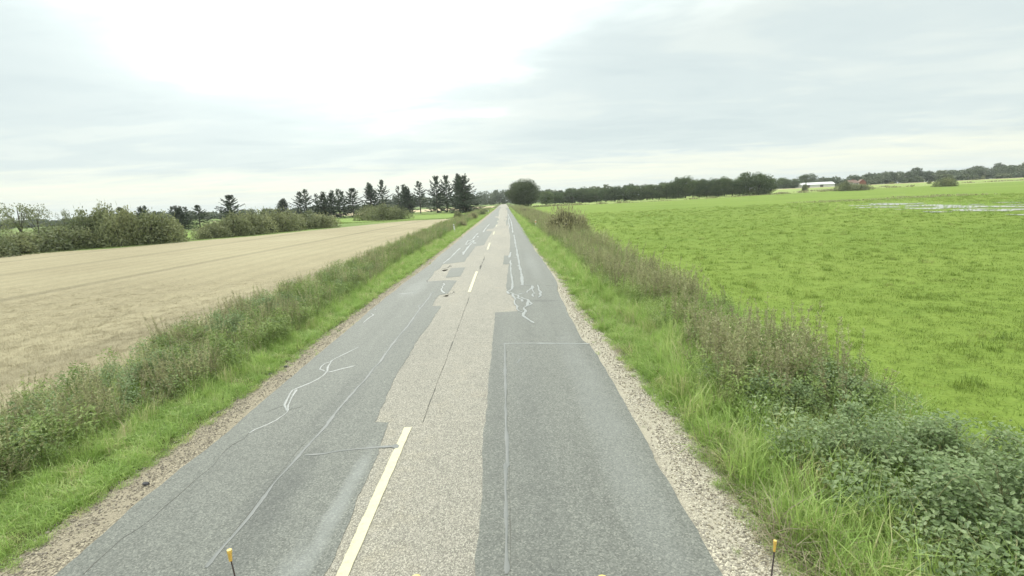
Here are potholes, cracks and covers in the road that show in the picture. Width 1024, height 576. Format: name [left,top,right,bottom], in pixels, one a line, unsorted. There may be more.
crack [423,292,470,421]
